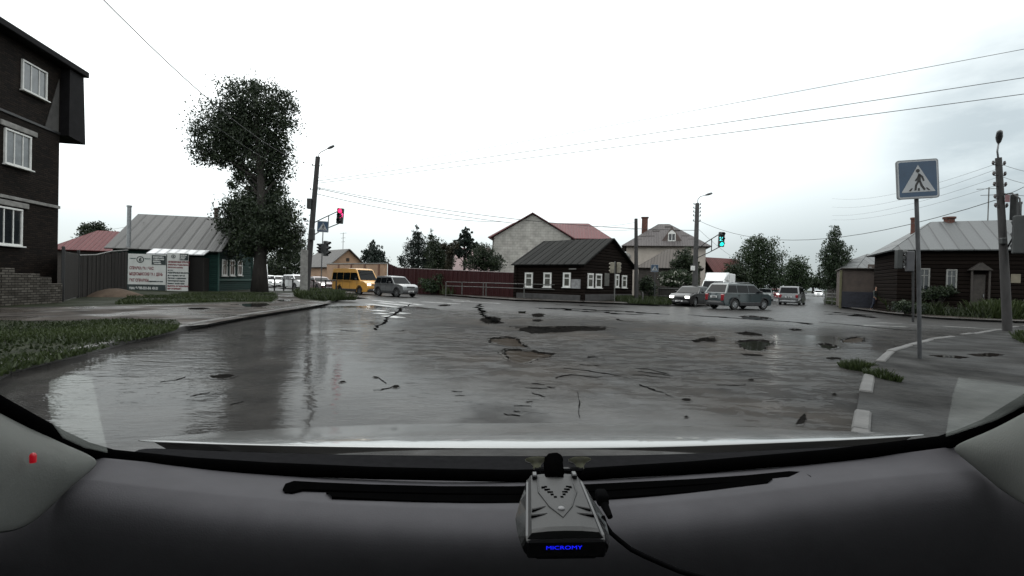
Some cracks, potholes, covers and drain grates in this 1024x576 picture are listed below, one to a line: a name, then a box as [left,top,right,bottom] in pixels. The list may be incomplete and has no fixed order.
pothole [734,339,775,352]
pothole [487,336,530,348]
crack [374,303,414,331]
pothole [816,342,840,350]
crack [636,368,673,397]
pothole [507,326,618,334]
pothole [840,336,866,344]
crack [504,356,619,417]
pothole [498,348,558,364]
crack [474,304,497,321]
